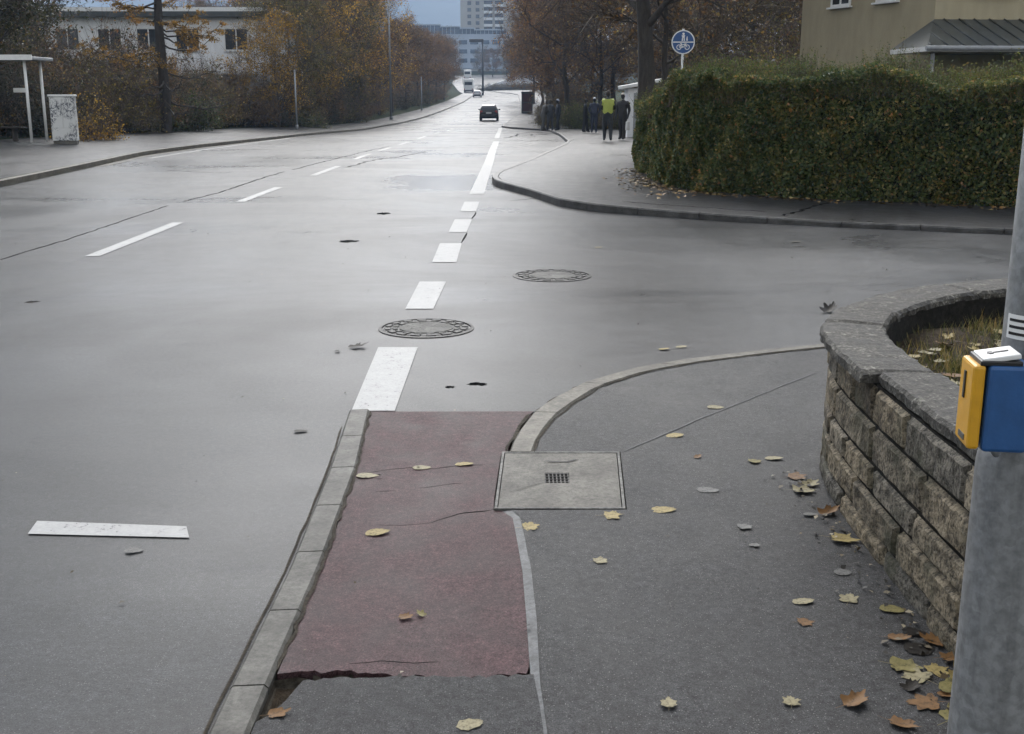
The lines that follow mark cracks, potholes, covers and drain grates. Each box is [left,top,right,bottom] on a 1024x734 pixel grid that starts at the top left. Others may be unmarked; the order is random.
pothole [258,677,308,721]
crack [395,510,490,526]
manhole cover [378,318,474,338]
manhole cover [513,269,592,282]
manhole cover [494,452,626,511]
